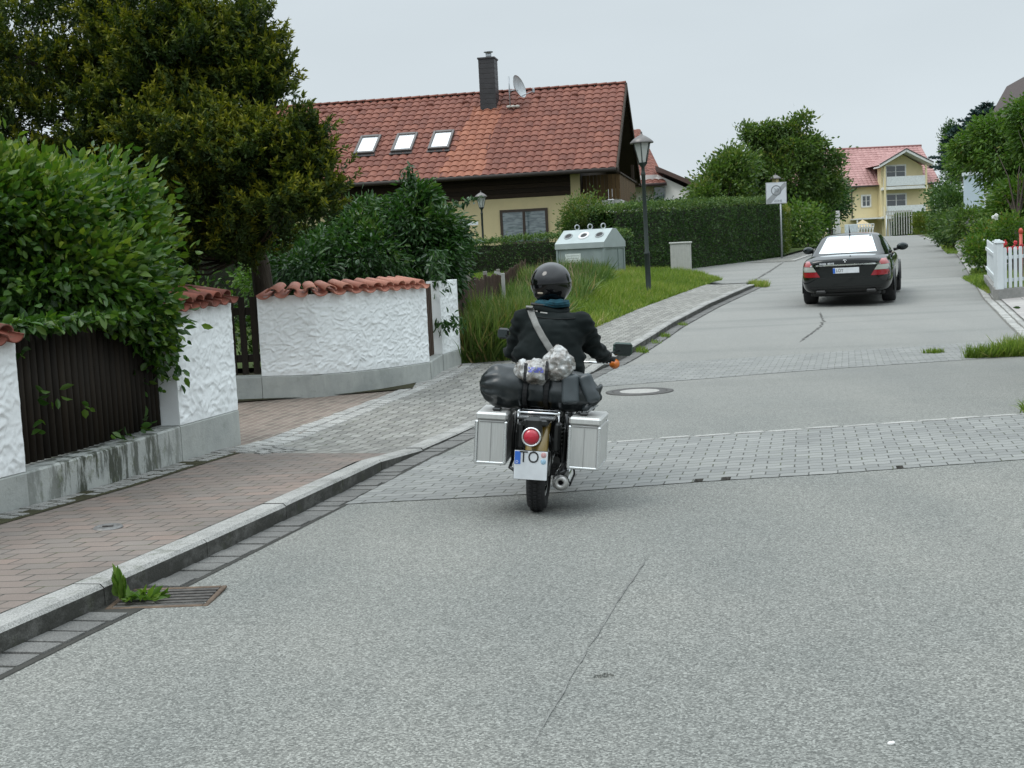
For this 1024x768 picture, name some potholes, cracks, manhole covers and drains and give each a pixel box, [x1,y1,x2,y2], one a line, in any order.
utility cover [93,523,123,531]
drain grate [105,585,227,609]
crack [800,312,826,342]
manhole cover [606,387,674,396]
